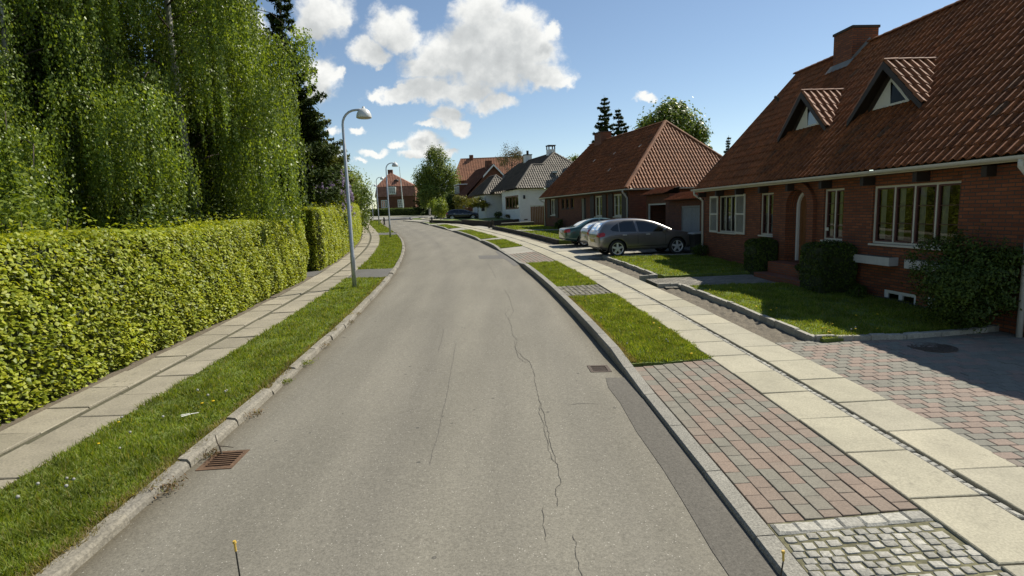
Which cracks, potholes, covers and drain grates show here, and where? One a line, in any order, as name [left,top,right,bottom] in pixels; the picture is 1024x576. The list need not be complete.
crack [430,329,456,463]
crack [504,289,562,542]
manhole cover [907,342,959,353]
drain grate [195,449,250,471]
